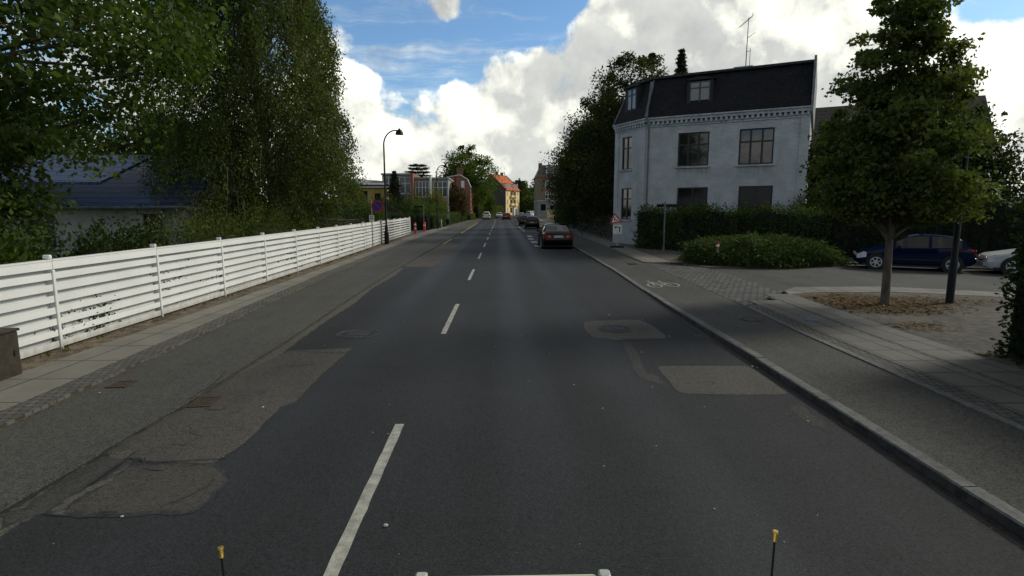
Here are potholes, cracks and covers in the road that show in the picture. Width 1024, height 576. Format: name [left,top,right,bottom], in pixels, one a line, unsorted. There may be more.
drain grate [105,380,138,388]
crack [129,438,222,470]
drain grate [185,396,222,408]
manhole cover [597,325,633,333]
manhole cover [336,329,381,339]
